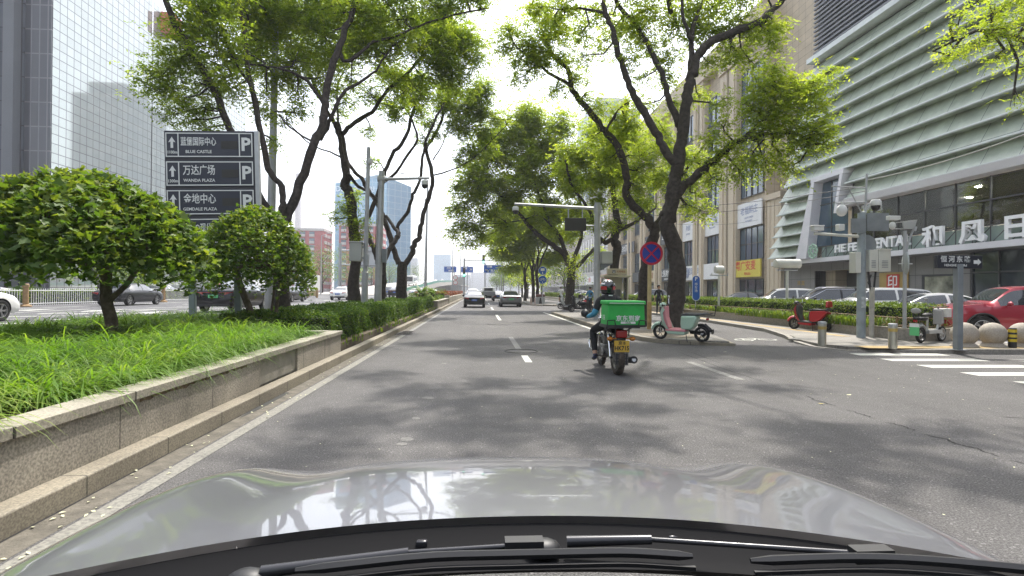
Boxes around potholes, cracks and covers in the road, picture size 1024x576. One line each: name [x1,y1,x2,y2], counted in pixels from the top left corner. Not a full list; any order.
crack [806,395,1021,463]
